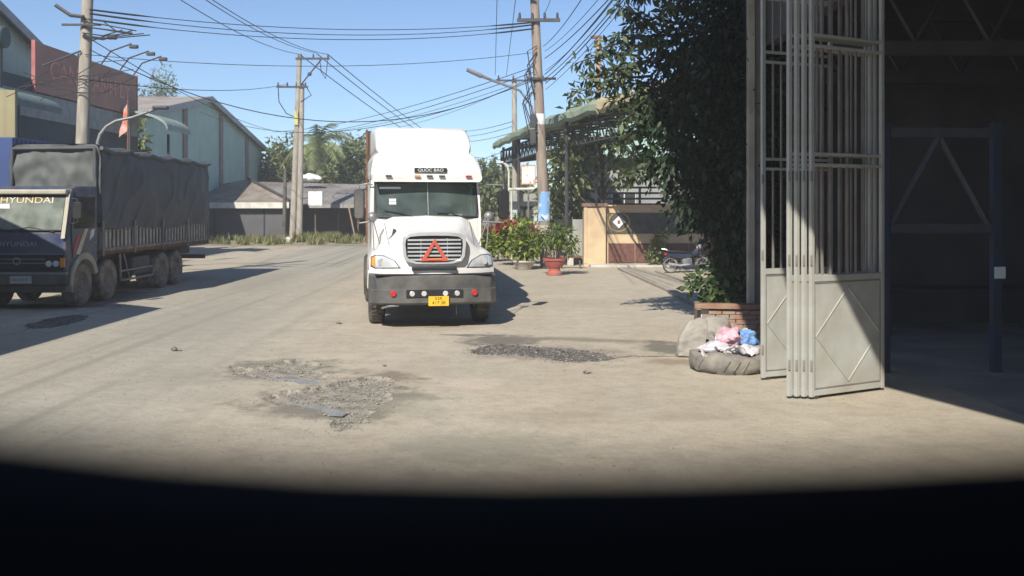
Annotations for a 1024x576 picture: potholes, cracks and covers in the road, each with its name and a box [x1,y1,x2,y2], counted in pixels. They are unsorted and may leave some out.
pothole [460,341,639,371]
pothole [239,374,415,435]
pothole [211,358,347,387]
